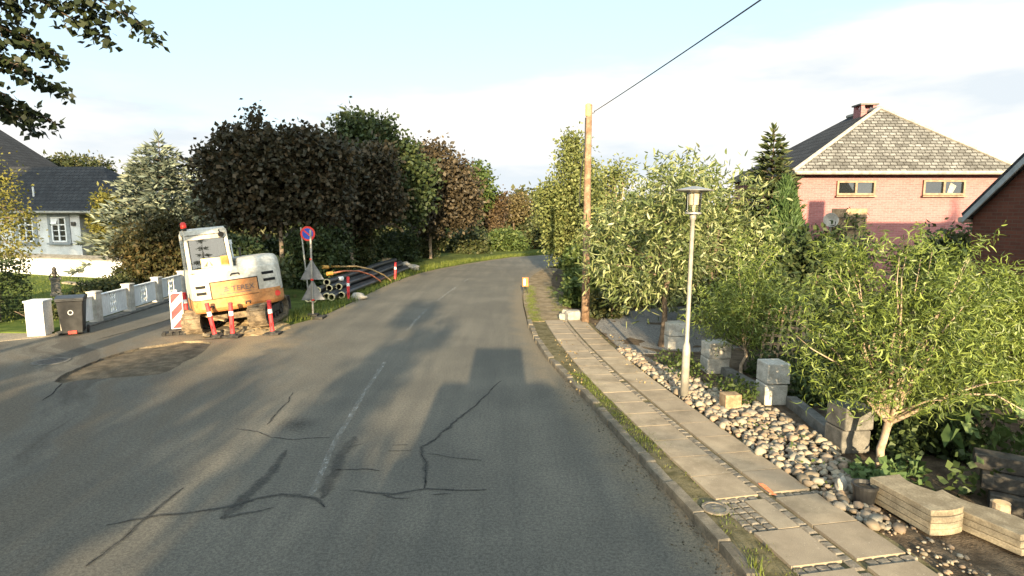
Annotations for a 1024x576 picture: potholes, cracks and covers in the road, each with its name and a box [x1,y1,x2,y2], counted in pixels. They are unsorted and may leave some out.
manhole cover [702,501,730,516]
crack [242,393,330,440]
